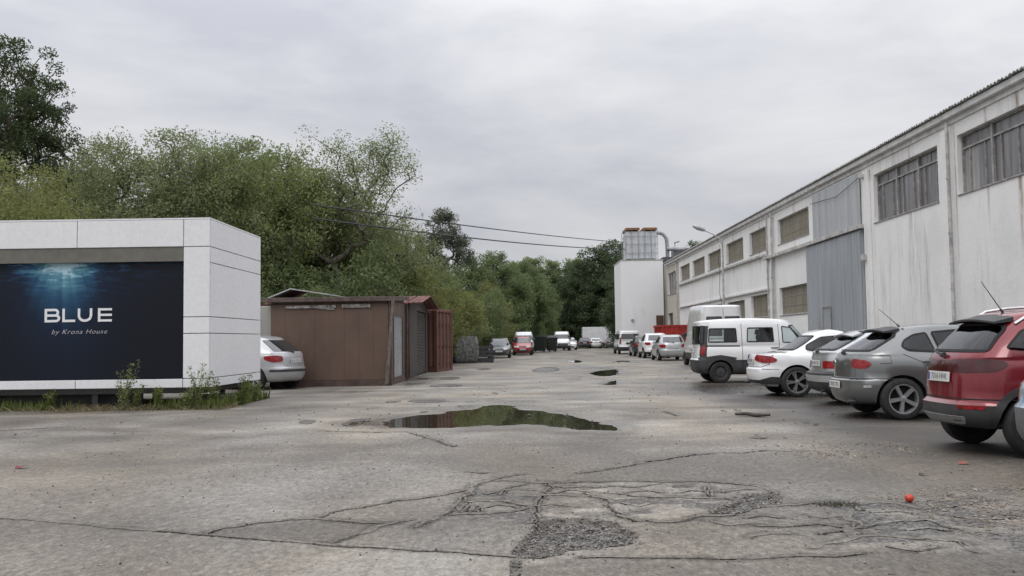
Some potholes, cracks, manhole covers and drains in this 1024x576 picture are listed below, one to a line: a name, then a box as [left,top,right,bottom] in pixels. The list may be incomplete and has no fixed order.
pothole [708,493,786,514]
crack [204,437,1011,560]
crack [321,430,456,447]
pothole [512,517,642,559]
